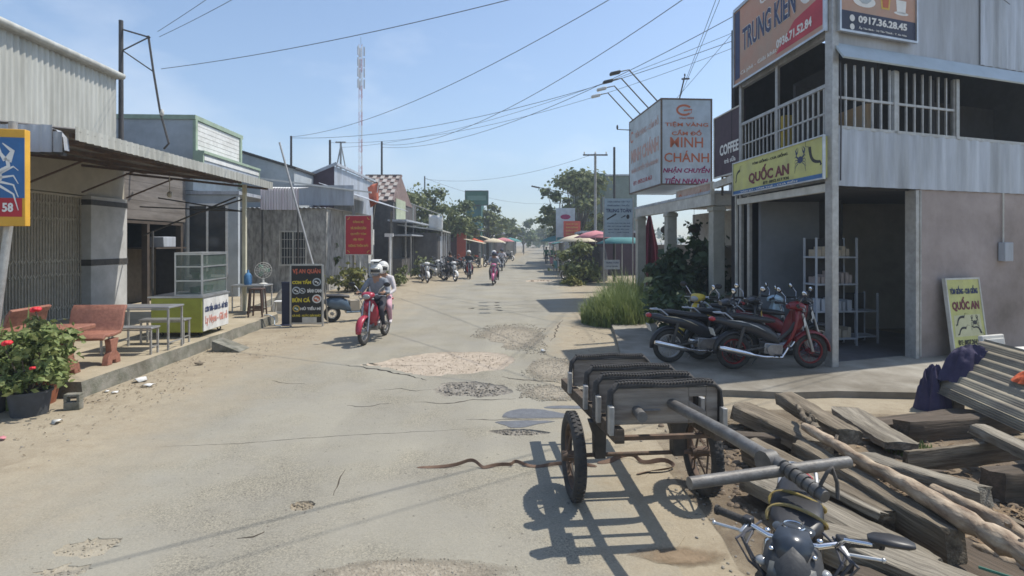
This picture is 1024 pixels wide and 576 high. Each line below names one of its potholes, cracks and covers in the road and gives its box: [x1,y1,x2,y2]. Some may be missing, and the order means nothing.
pothole [433,381,513,397]
pothole [53,537,123,559]
crack [348,365,563,420]
pothole [290,501,316,511]
